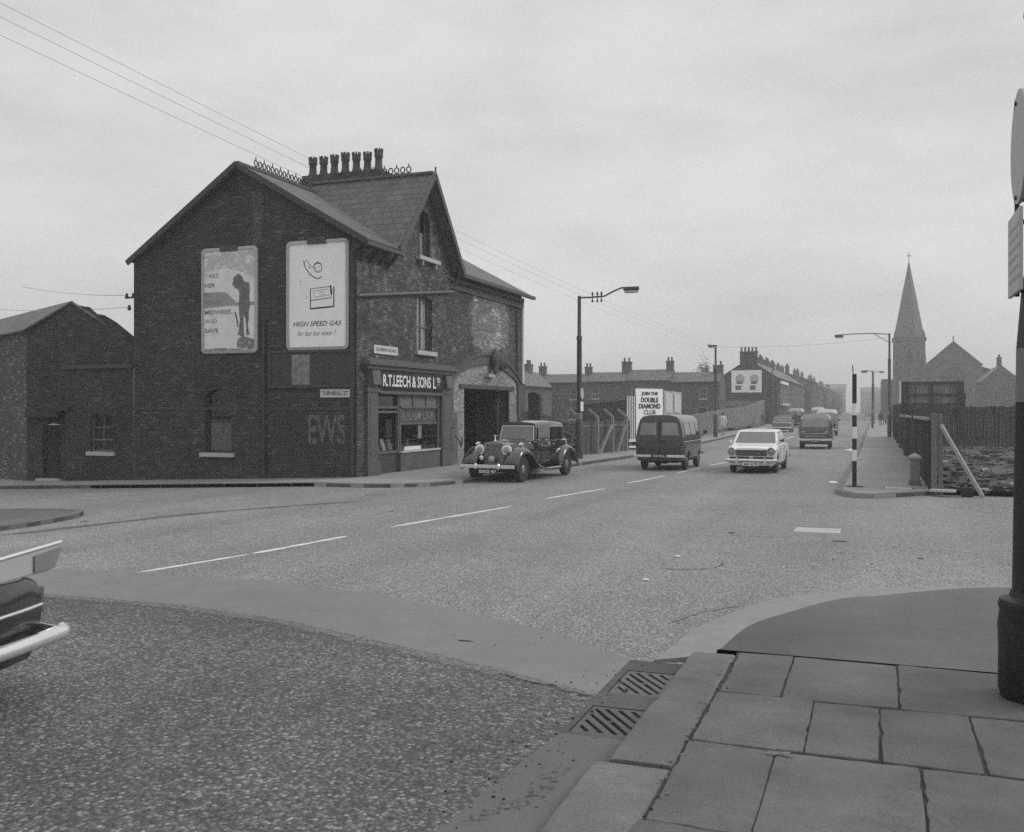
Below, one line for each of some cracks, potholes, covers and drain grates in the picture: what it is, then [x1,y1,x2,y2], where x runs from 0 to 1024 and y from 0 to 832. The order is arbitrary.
drain grate [569,705,645,738]
crack [669,605,740,623]
drain grate [608,670,675,697]
